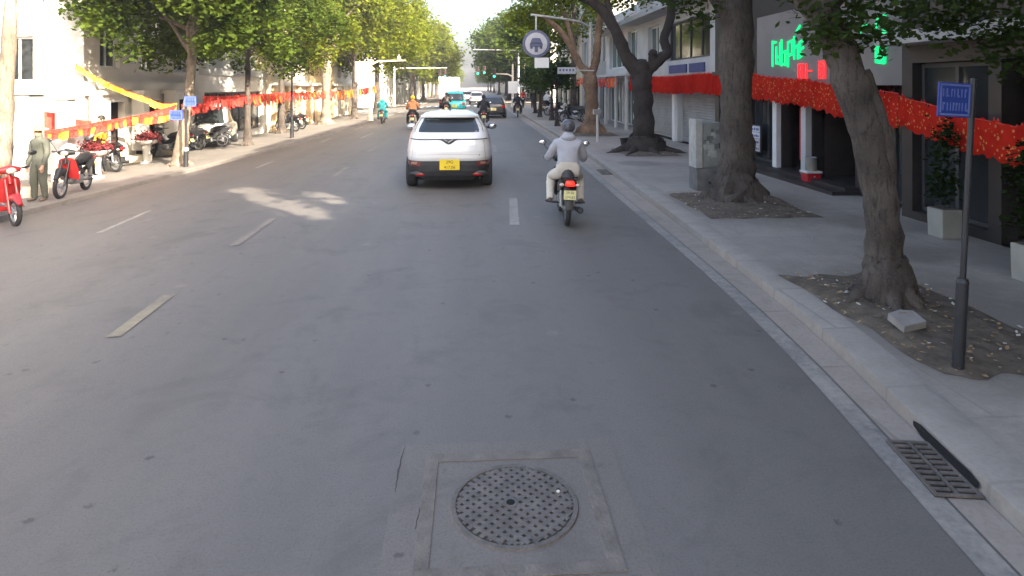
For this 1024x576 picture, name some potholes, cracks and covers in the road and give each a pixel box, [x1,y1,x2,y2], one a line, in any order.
drain grate [886,439,985,500]
manhole cover [377,438,662,576]
